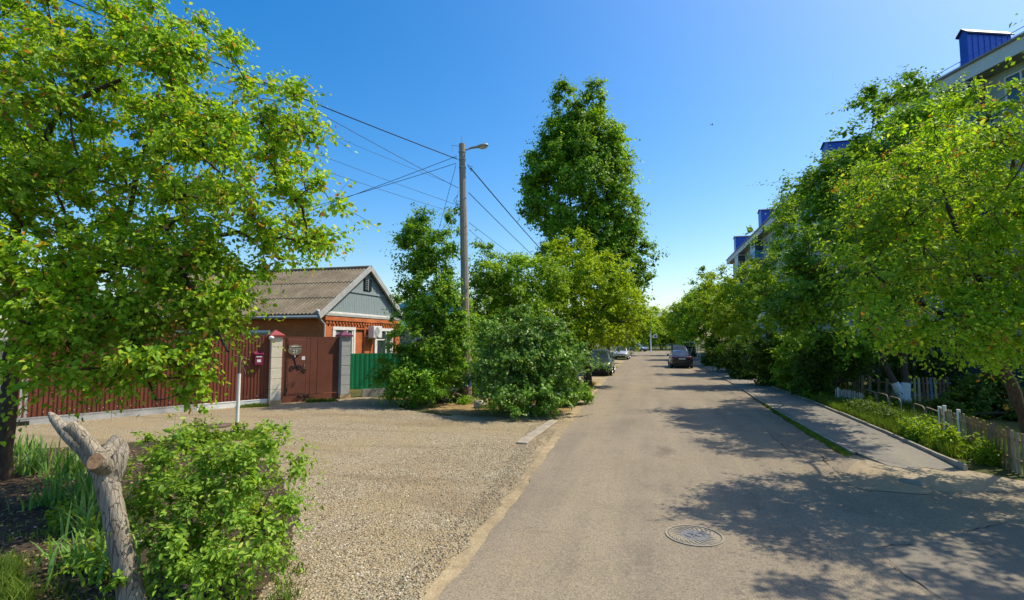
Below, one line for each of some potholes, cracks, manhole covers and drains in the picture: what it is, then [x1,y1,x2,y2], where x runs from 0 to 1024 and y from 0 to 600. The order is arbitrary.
manhole cover [665,525,725,547]
